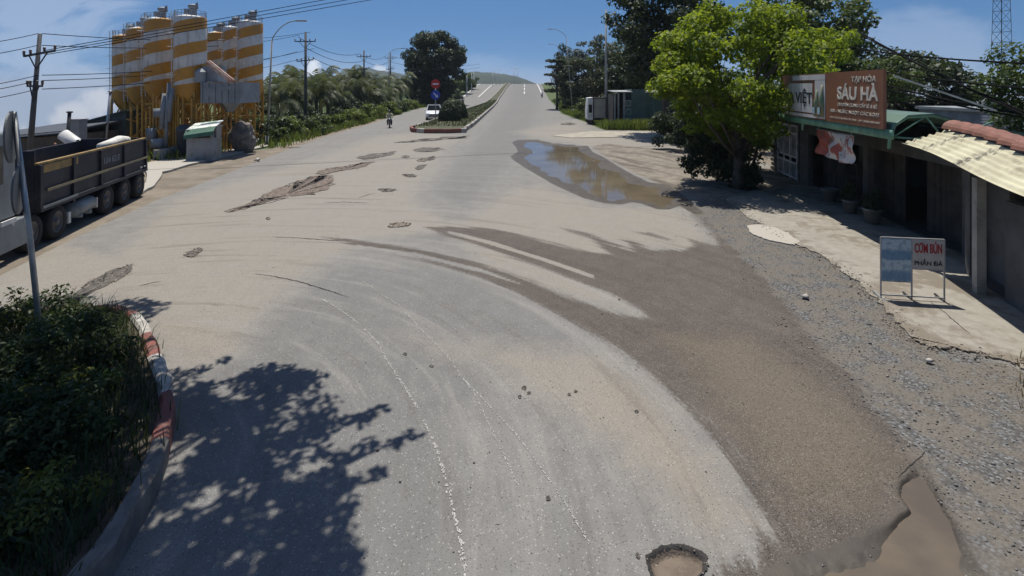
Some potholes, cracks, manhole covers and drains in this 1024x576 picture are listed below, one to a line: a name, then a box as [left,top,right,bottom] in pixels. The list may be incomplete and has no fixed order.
pothole [645,543,714,576]
crack [261,274,344,296]
